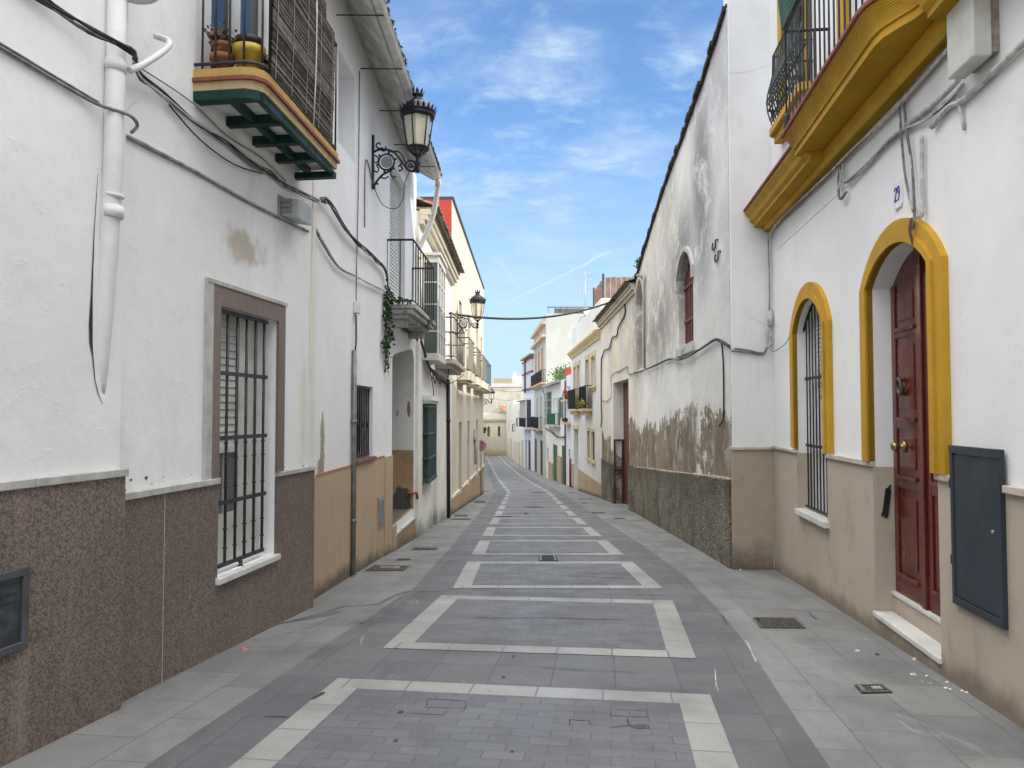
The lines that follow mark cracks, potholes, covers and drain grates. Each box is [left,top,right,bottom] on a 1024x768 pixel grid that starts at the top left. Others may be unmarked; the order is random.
manhole cover [854,684,893,693]
drain grate [753,617,806,628]
